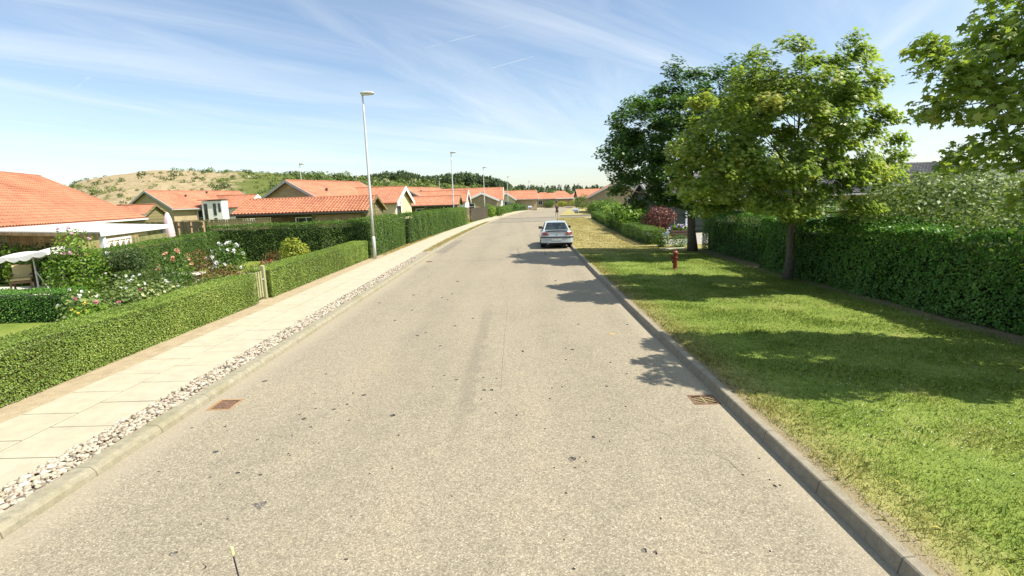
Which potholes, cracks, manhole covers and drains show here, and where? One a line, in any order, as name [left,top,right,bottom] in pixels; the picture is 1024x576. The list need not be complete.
drain grate [687,394,721,405]
